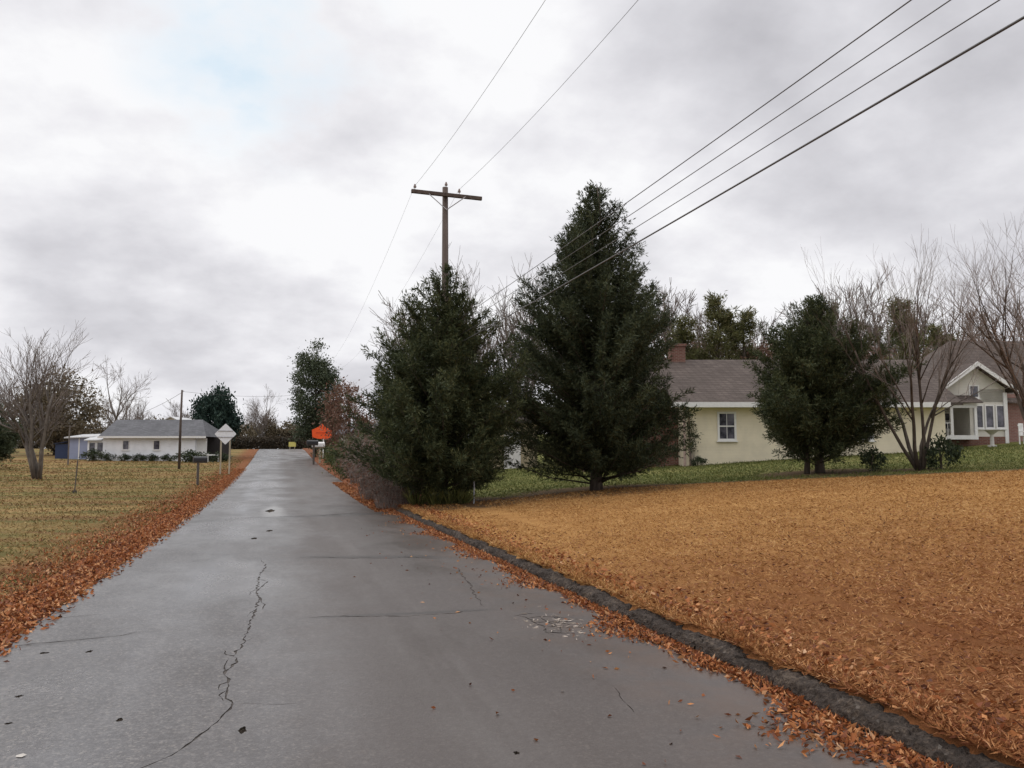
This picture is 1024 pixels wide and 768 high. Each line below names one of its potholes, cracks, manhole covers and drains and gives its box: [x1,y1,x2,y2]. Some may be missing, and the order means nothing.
crack [313,569,481,618]
crack [142,561,297,768]
